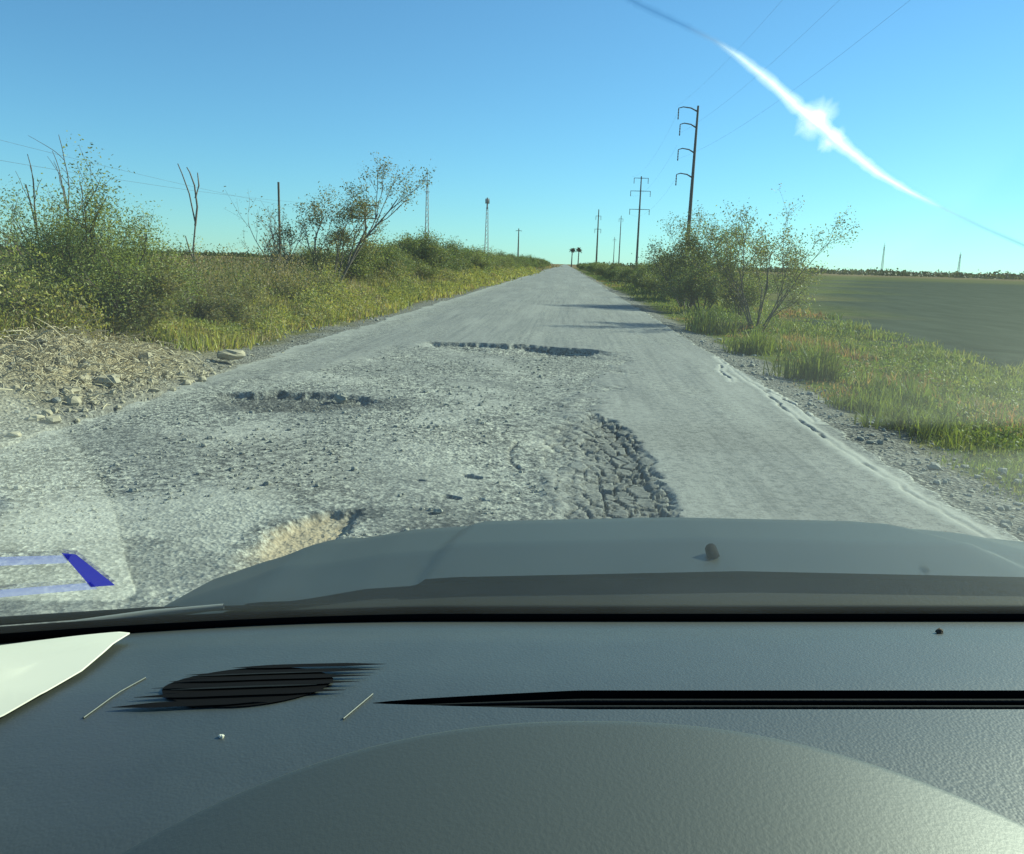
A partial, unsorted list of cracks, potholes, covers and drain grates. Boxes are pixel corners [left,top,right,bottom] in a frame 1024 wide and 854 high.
pothole [189,389,387,417]
pothole [176,508,367,599]
crack [471,413,683,520]
pothole [423,341,632,363]
